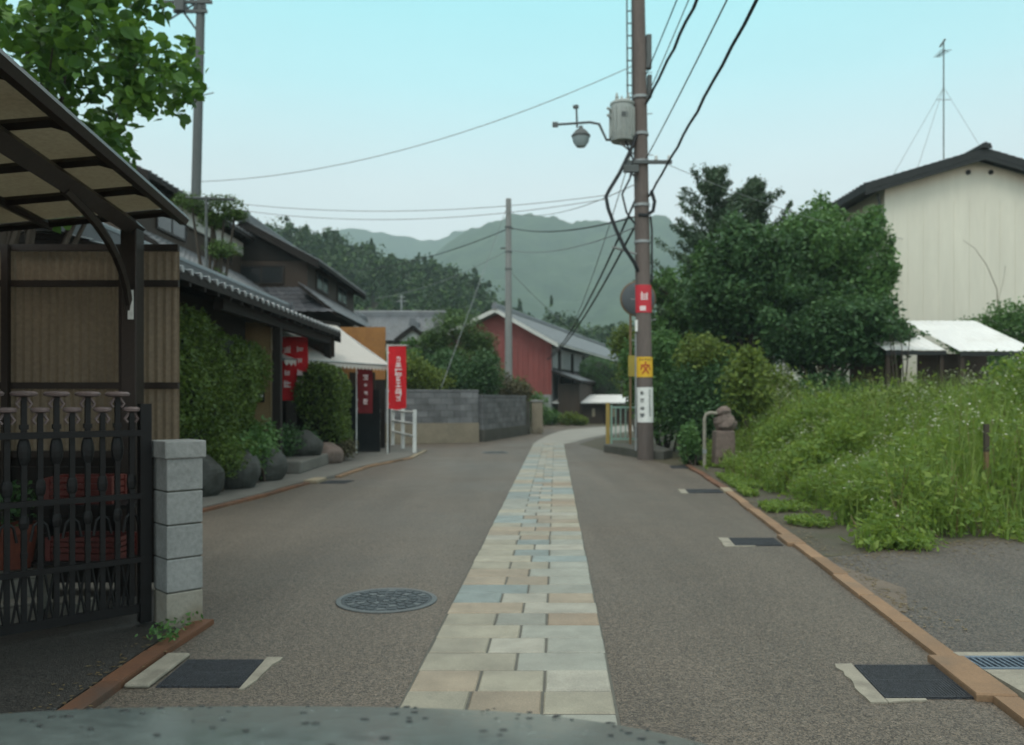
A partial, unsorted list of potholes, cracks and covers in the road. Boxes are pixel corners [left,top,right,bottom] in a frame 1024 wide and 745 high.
drain grate [953,652,1024,700]
manhole cover [335,588,437,614]
